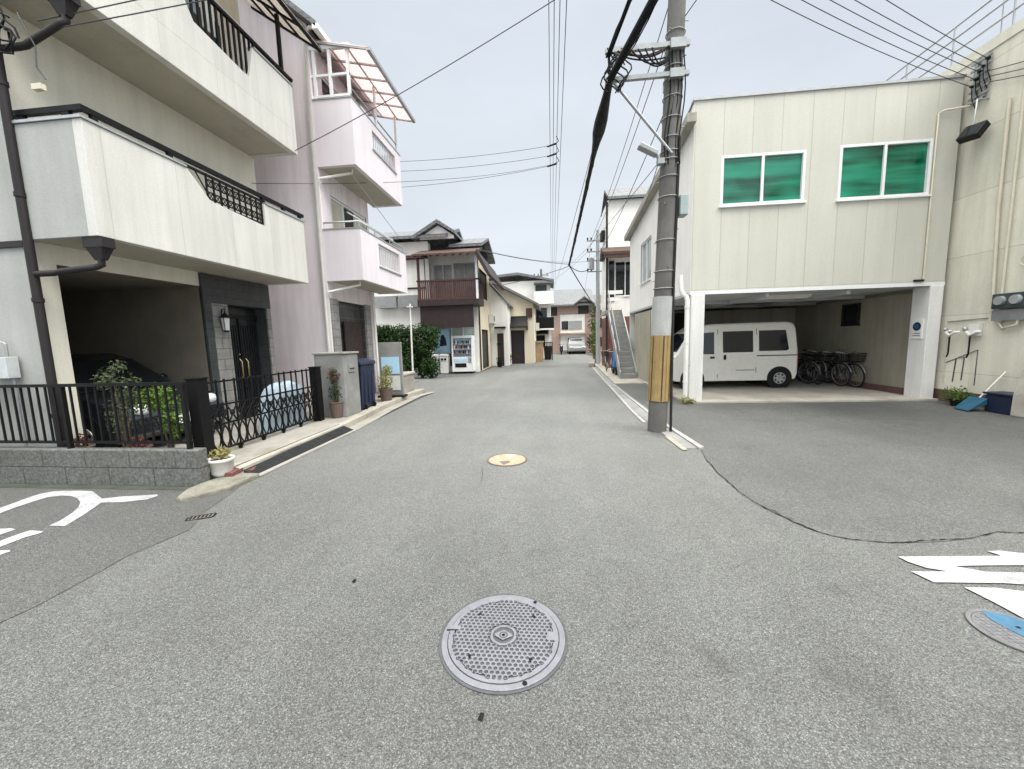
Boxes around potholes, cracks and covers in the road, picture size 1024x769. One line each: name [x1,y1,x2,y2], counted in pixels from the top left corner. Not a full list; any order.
manhole cover [487,453,528,466]
manhole cover [965,609,1024,652]
manhole cover [439,594,568,695]
